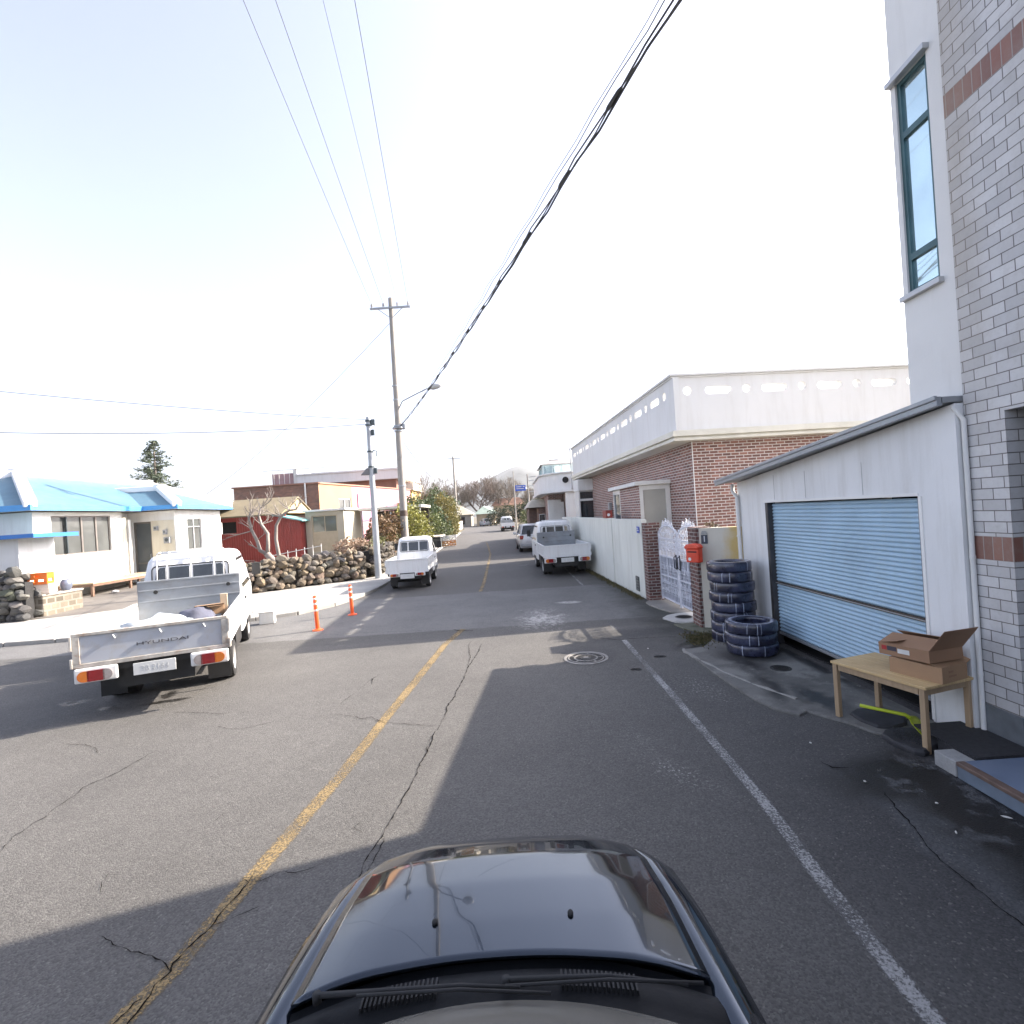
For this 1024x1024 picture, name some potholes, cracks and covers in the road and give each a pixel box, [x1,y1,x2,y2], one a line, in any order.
crack [342,644,481,878]
manhole cover [564,651,608,665]
crack [102,856,337,1024]
